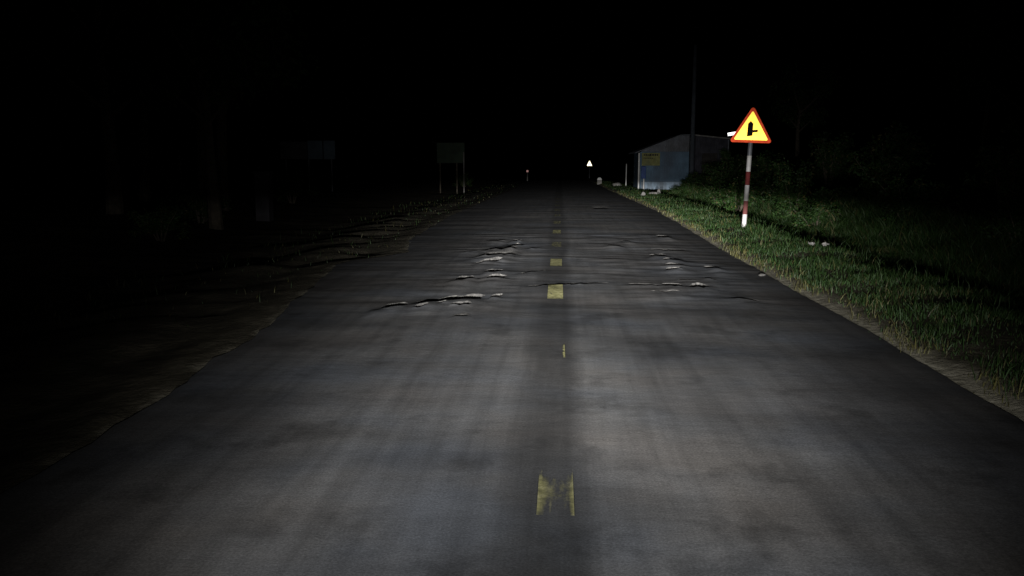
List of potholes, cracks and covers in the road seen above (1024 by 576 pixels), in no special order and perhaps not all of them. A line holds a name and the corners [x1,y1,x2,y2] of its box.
crack [521,270,606,286]
